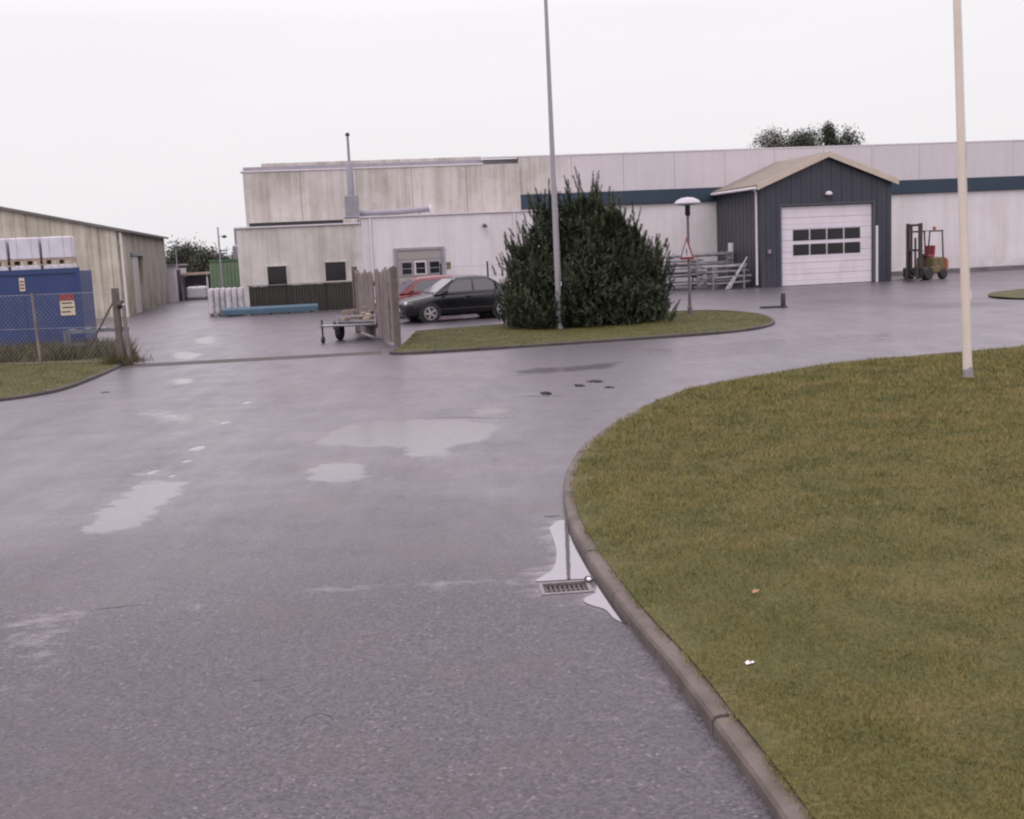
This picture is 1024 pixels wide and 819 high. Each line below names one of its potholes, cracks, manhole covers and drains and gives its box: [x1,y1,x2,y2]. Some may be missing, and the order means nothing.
drain grate [538,576,594,595]
